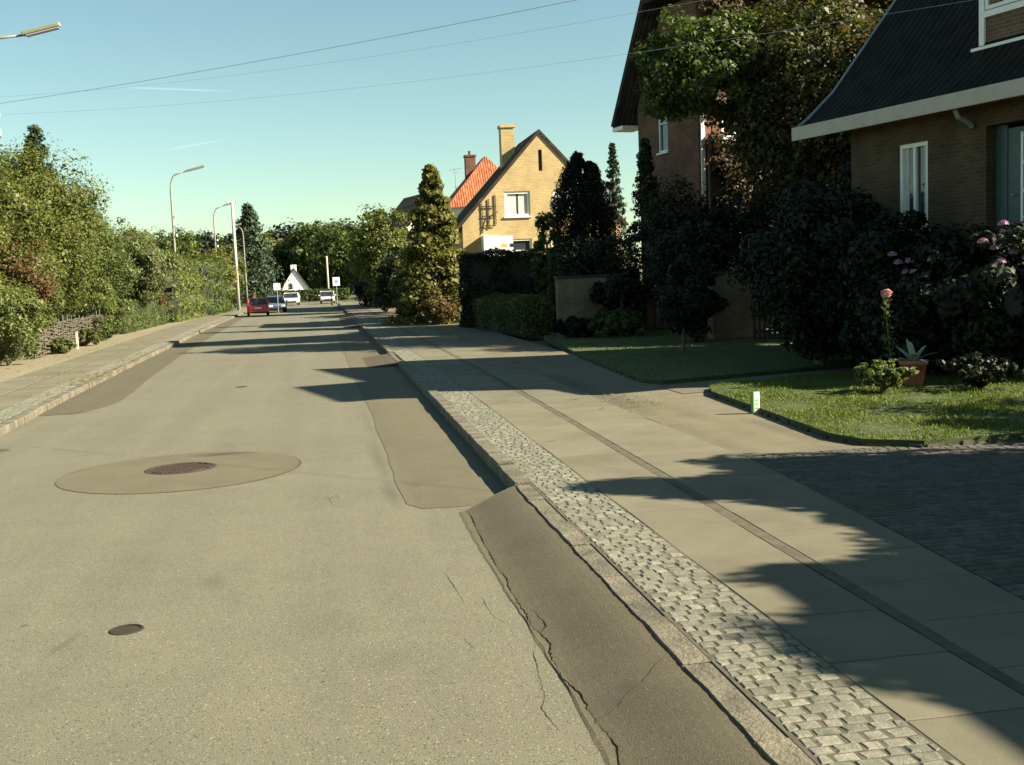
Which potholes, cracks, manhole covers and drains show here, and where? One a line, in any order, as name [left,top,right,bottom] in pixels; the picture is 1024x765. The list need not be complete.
manhole cover [144,462,217,475]
manhole cover [108,624,145,635]
crack [466,488,774,765]
